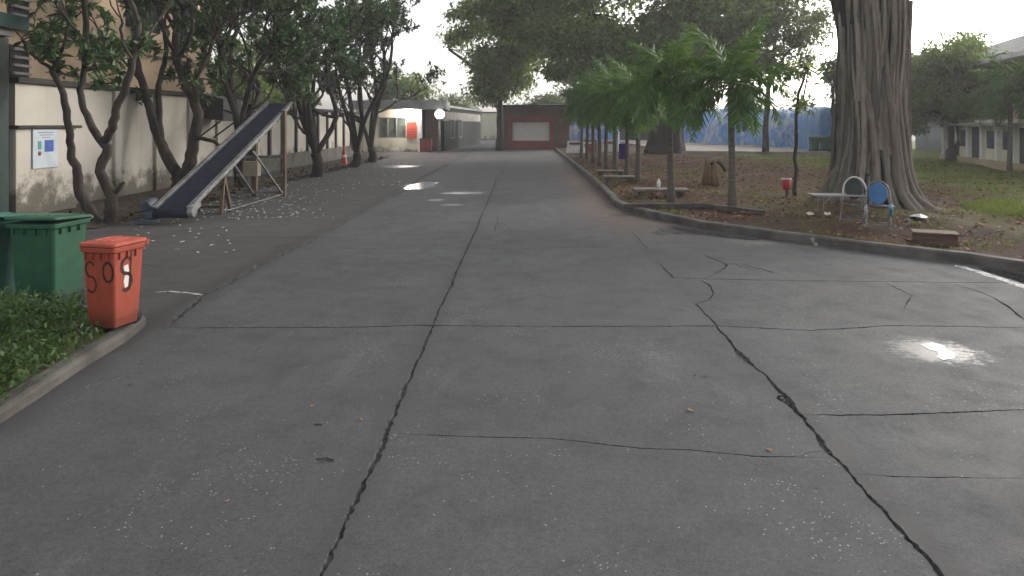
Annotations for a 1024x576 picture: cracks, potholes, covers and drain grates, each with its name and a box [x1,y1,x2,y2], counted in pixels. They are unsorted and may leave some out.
crack [398,255,1024,576]
